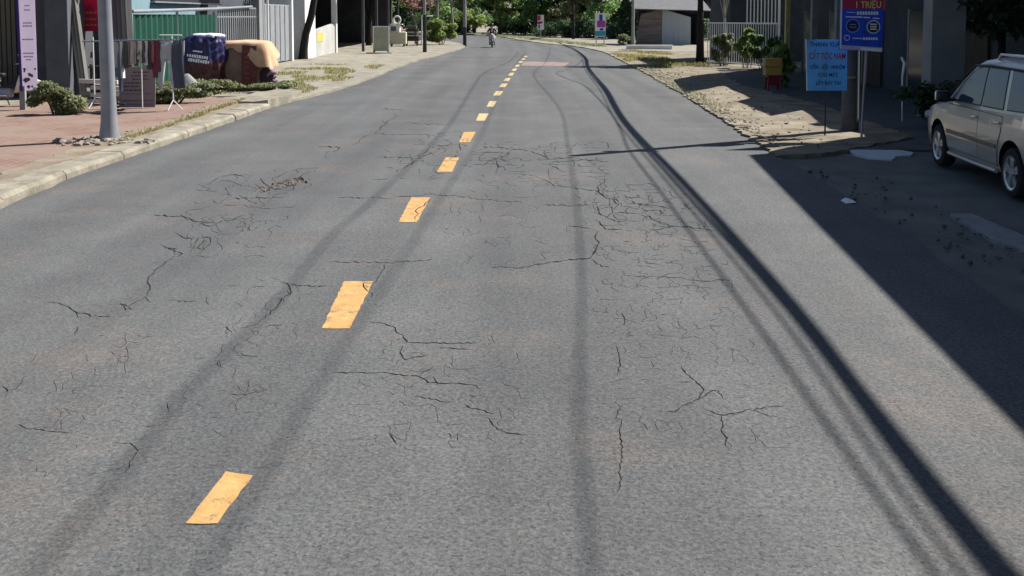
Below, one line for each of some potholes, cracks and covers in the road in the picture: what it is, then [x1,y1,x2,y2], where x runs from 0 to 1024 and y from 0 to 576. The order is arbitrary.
pothole [257,176,311,194]
crack [51,108,783,492]
